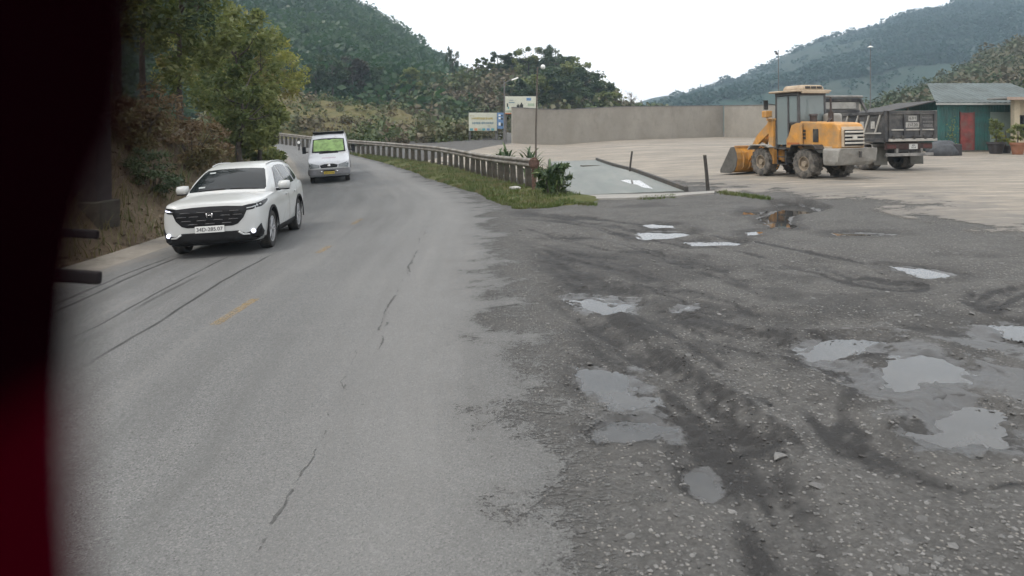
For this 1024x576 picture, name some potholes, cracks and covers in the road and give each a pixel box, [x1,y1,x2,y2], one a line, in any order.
pothole [616,226,713,243]
pothole [560,412,712,456]
pothole [627,221,689,229]
crack [258,225,427,551]
pothole [549,356,692,418]
pothole [845,345,1019,402]
pothole [871,390,1024,467]
pothole [549,293,653,319]
pothole [743,197,838,231]
